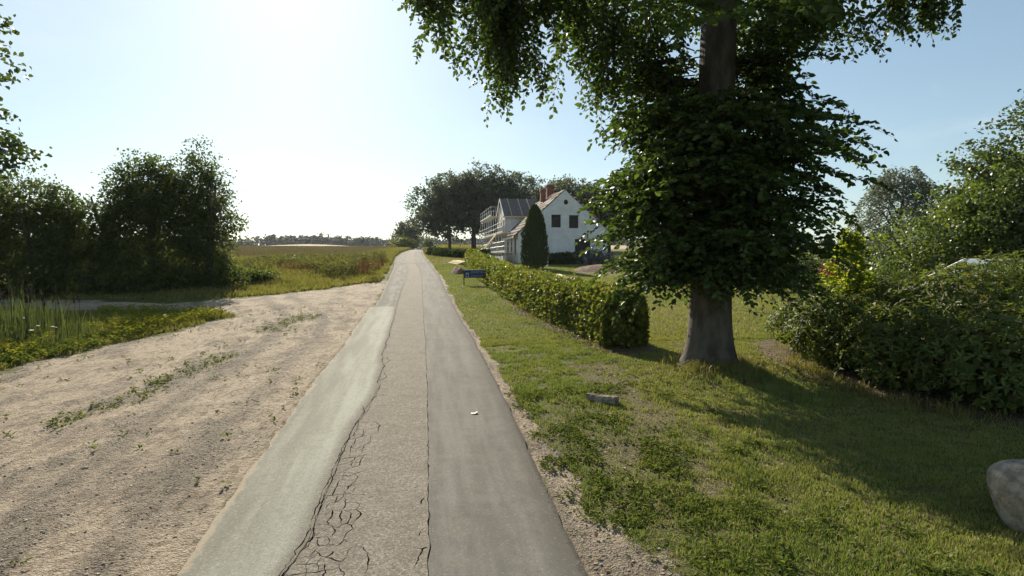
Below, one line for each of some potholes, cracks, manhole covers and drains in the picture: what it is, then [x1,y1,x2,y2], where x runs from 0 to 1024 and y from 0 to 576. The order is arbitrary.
crack [278,384,386,576]
